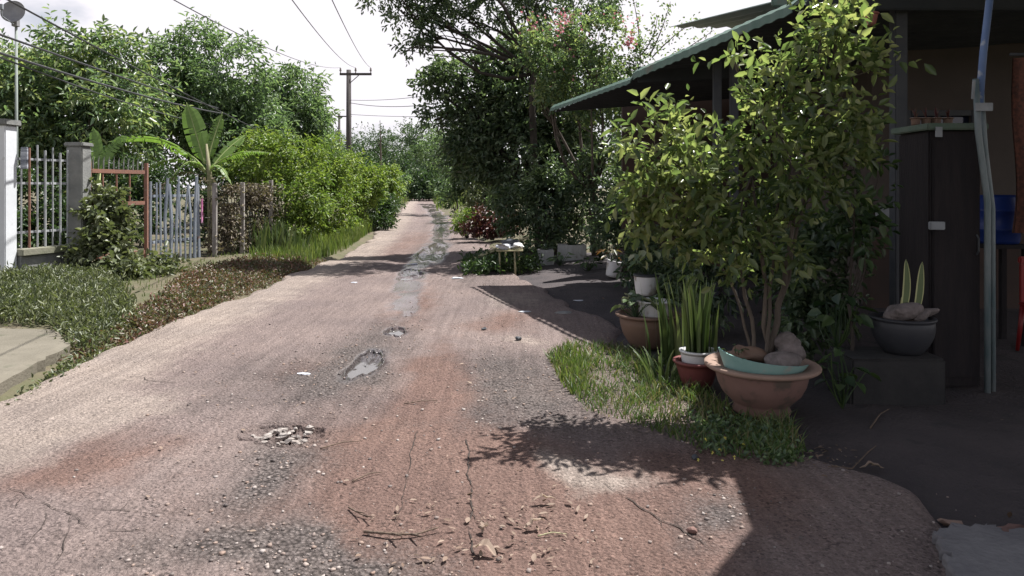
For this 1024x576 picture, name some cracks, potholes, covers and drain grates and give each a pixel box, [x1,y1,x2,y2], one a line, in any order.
crack [465,439,475,565]
pothole [343,349,386,381]
crack [395,431,418,525]
pothole [237,423,332,448]
crack [602,481,713,550]
crack [4,486,150,557]
pothole [383,326,407,337]
